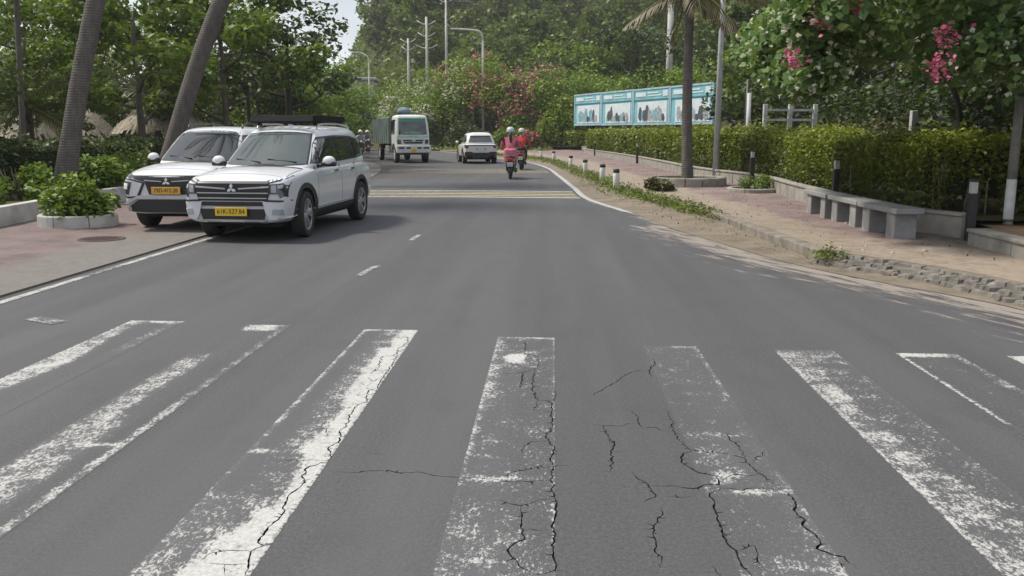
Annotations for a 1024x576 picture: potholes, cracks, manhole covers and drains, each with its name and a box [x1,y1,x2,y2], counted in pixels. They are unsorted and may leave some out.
crack [349,341,565,574]
crack [204,338,409,576]
crack [603,411,857,576]
